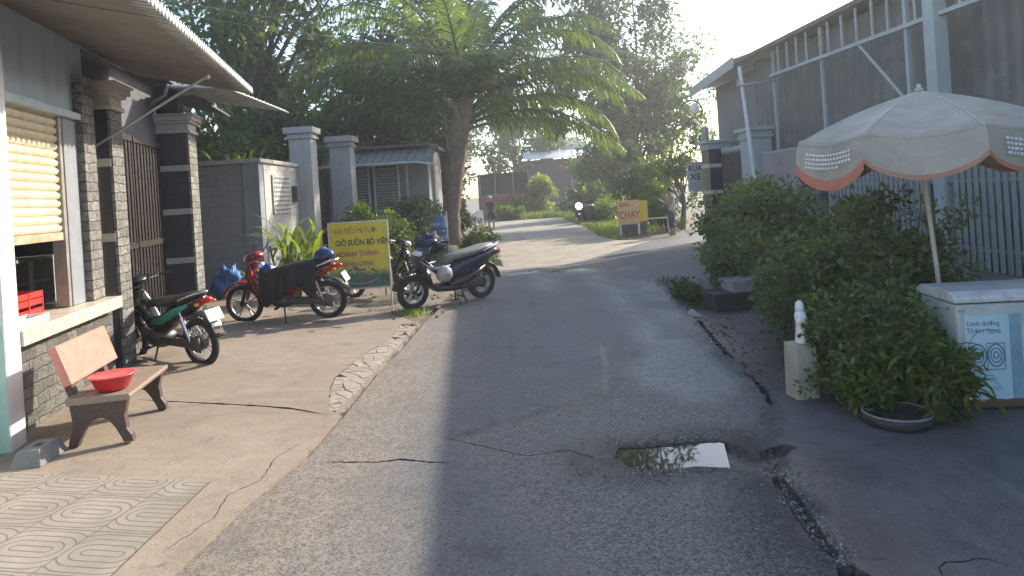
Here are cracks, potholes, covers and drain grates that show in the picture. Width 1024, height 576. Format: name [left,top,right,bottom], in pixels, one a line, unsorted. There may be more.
pothole [615,439,798,477]
crack [696,319,773,406]
crack [772,472,898,563]
crack [164,444,298,551]
crack [939,558,1011,575]
crack [446,438,596,459]
